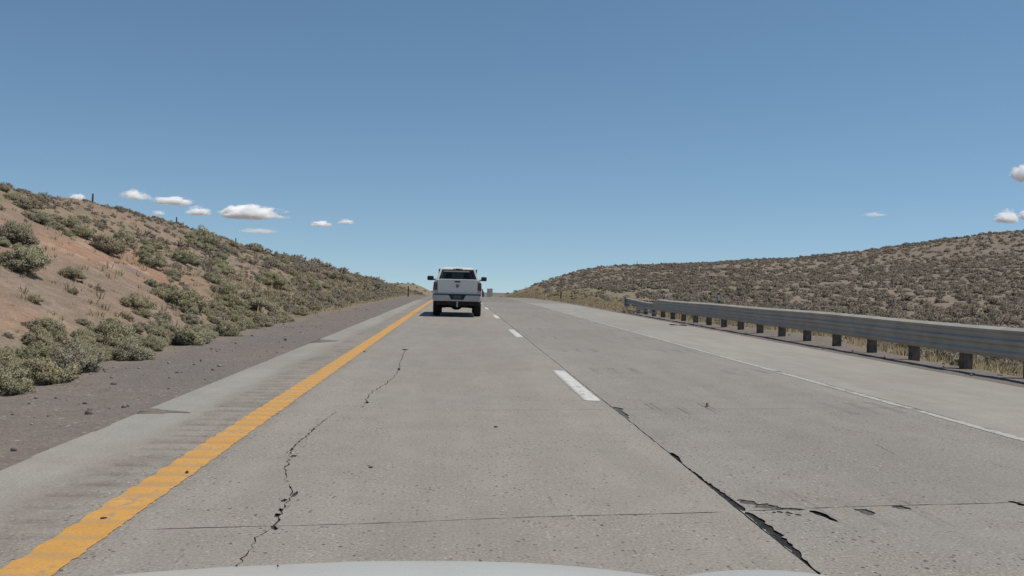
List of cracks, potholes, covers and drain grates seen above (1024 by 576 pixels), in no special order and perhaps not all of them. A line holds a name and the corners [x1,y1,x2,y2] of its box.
crack [361,349,408,408]
crack [235,412,336,567]
